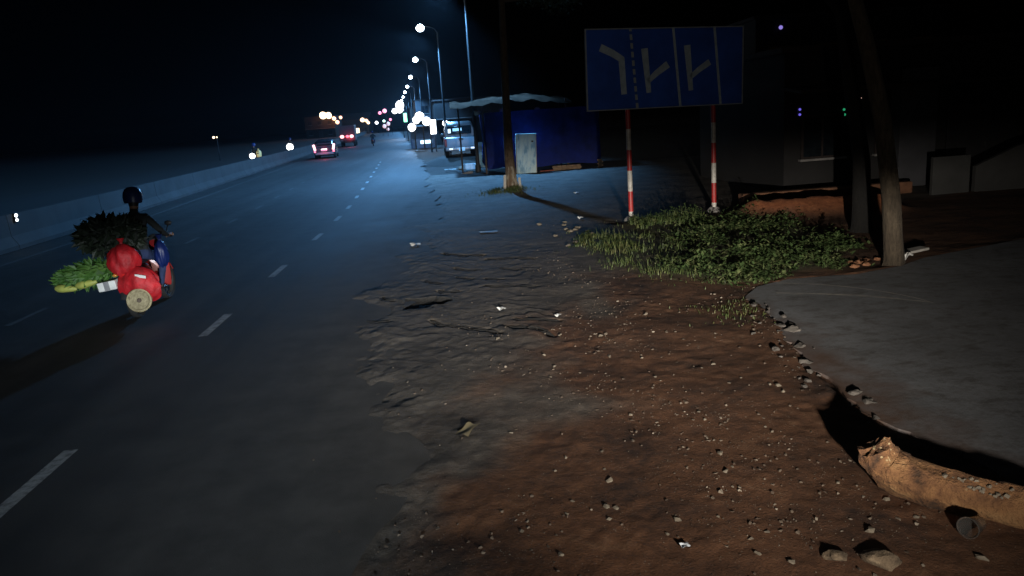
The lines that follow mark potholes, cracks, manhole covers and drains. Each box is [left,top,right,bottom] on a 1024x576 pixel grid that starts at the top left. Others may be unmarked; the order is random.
pothole [395,296,463,311]
crack [430,318,560,337]
